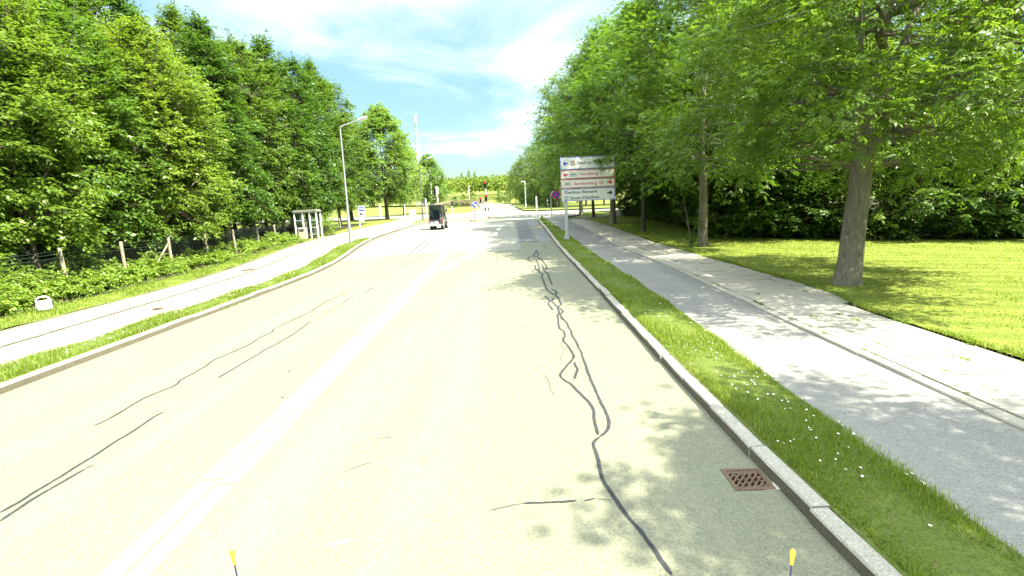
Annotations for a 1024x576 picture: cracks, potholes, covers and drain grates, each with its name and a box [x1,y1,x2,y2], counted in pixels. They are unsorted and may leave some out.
drain grate [720,468,780,491]
